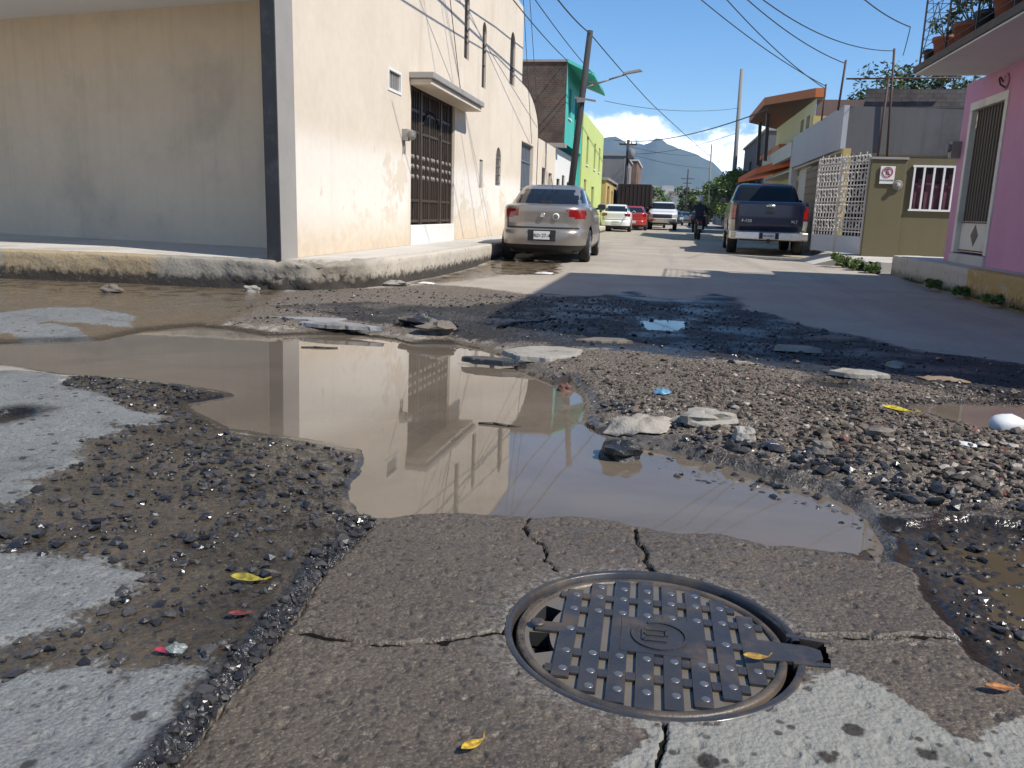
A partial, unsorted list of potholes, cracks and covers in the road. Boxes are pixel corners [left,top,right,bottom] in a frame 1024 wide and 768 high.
crack [522,518,556,572]
crack [296,632,504,647]
pothole [900,400,1024,421]
pothole [0,325,863,555]
pothole [876,512,1024,696]
crack [634,530,655,572]
manhole cover [503,570,831,727]
crack [655,724,669,768]
